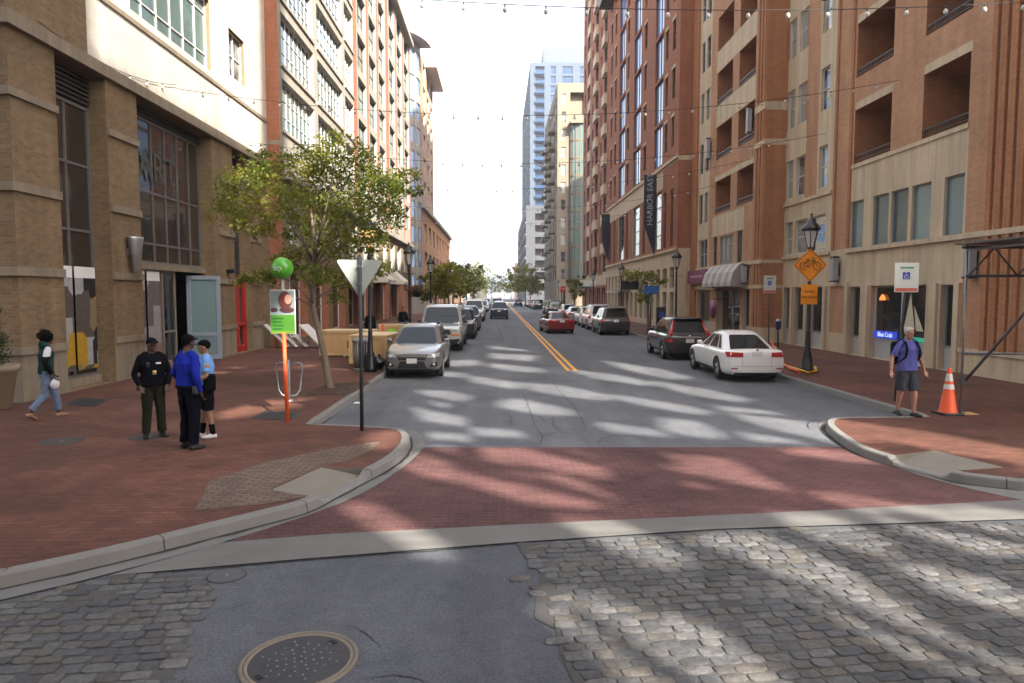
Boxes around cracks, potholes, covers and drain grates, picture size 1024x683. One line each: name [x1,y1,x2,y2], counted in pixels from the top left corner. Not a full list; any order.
crack [506,385,639,446]
manhole cover [206,568,247,584]
manhole cover [128,433,170,441]
manhole cover [237,631,359,683]
manhole cover [37,437,85,446]
